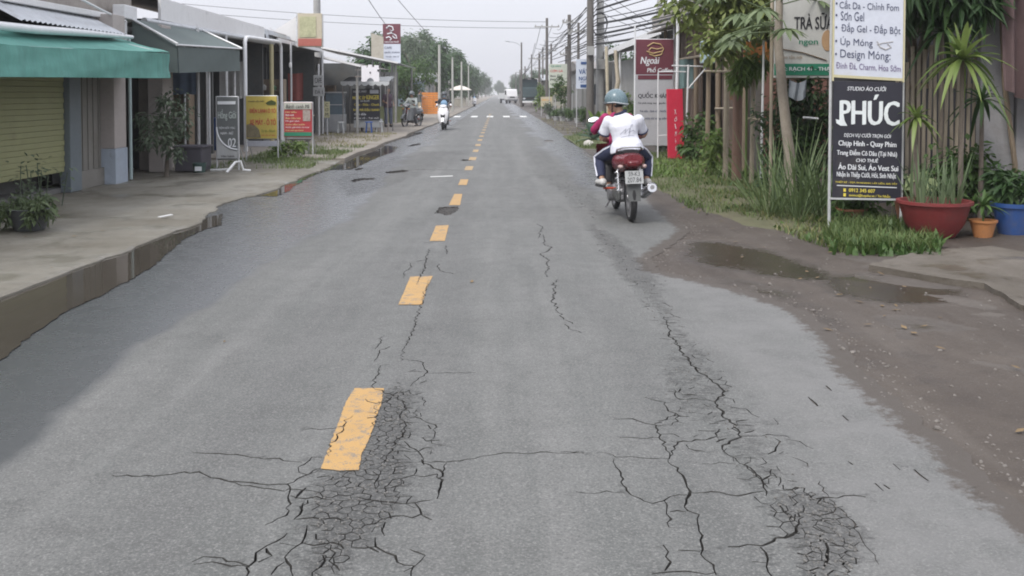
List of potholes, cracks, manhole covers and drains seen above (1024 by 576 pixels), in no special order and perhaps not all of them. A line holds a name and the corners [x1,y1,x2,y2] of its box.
pothole [435,206,459,215]
crack [553,169,878,576]
crack [403,242,453,279]
crack [113,286,577,576]
crack [537,224,581,333]
